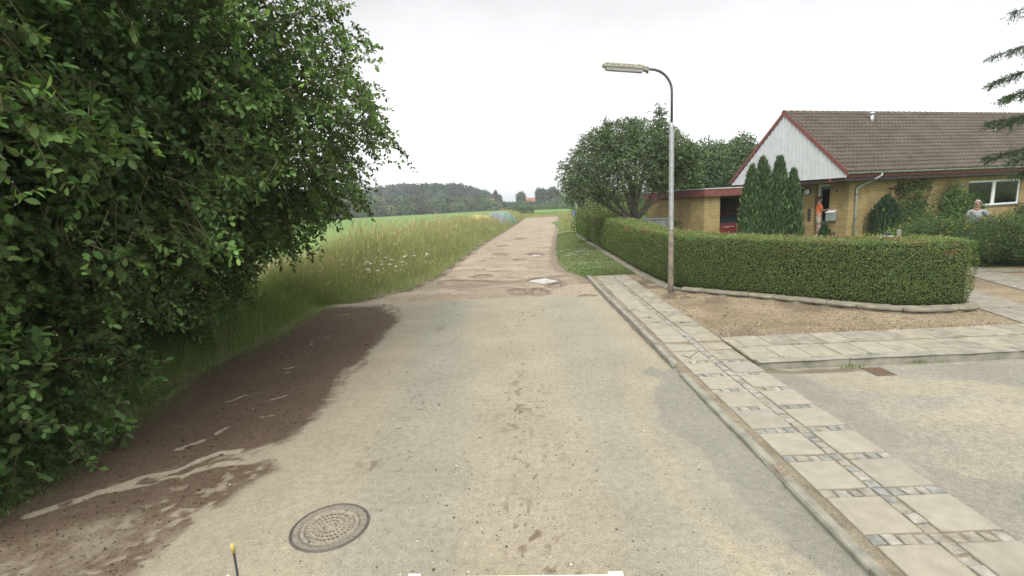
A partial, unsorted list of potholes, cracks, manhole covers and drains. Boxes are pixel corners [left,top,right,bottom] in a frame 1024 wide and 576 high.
pothole [506,288,532,296]
pothole [525,287,553,296]
manhole cover [288,503,370,553]
drain grate [861,367,897,376]
